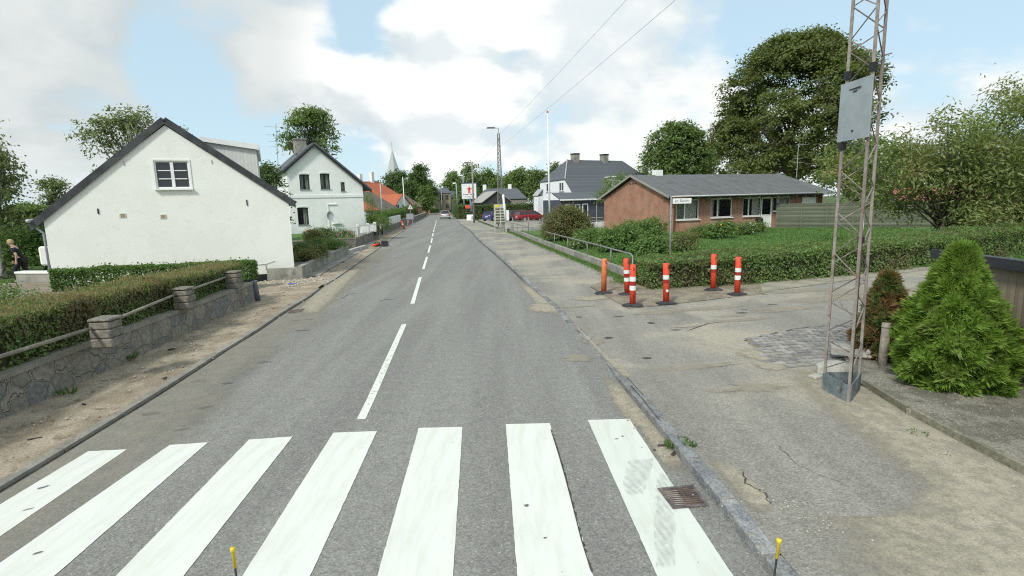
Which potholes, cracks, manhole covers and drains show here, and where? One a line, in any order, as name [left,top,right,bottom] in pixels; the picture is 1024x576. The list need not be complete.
drain grate [658,484,709,509]
